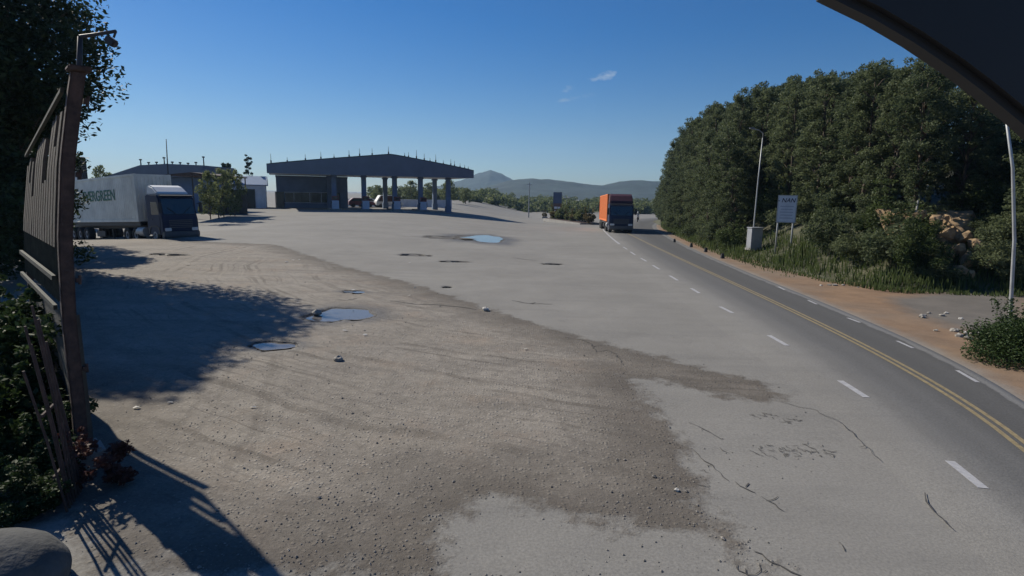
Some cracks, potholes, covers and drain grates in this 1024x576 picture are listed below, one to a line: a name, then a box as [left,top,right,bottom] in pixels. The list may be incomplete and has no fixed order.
crack [750,442,836,458]
crack [924,492,953,529]
crack [736,551,801,576]
crack [689,422,783,511]
pothole [248,340,299,352]
pothole [298,307,377,322]
pothole [452,235,505,243]
